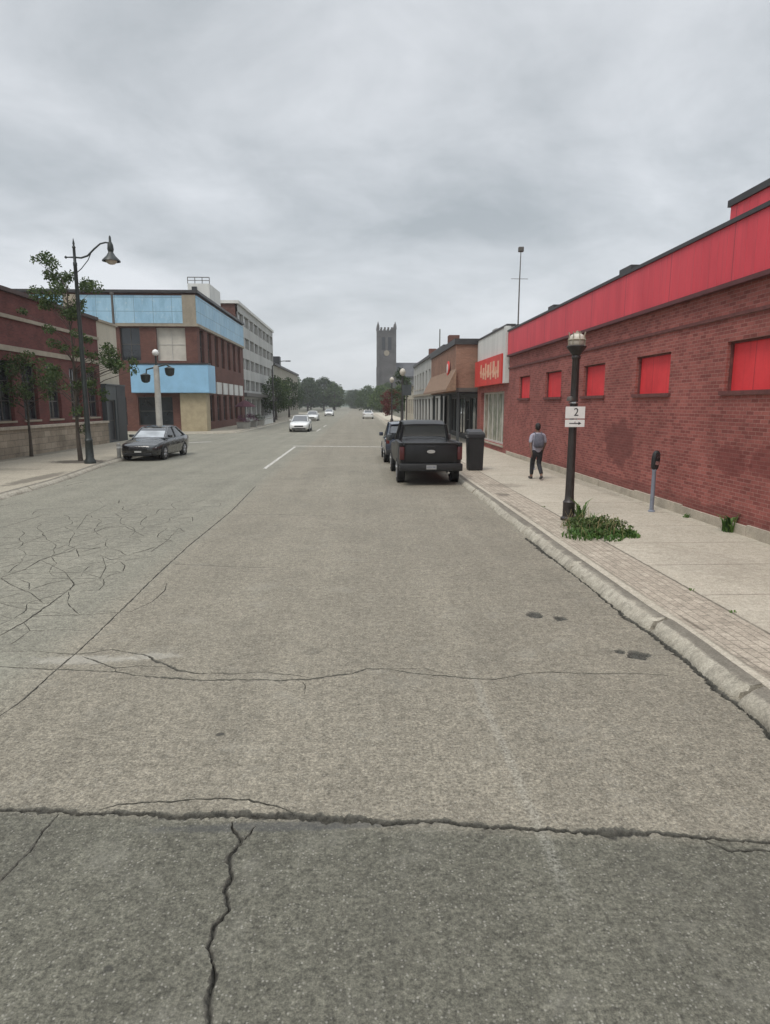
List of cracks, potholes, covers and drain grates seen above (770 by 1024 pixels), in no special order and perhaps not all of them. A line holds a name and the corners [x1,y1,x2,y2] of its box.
crack [0,500,221,644]
crack [0,538,770,740]
crack [0,797,770,1024]
